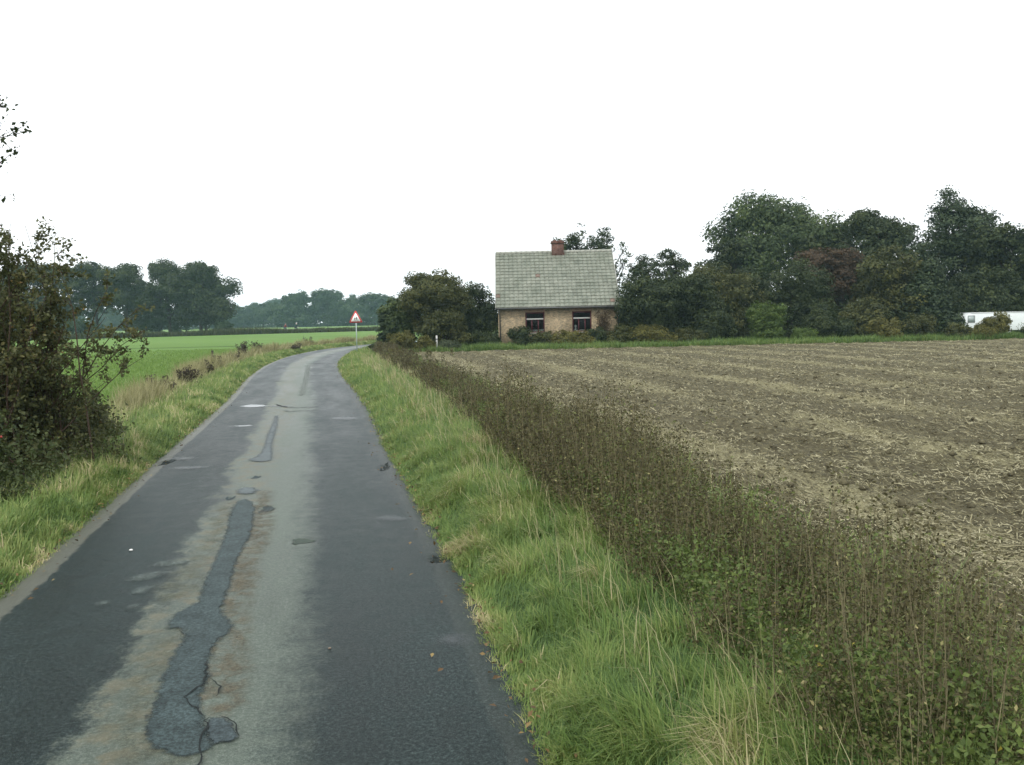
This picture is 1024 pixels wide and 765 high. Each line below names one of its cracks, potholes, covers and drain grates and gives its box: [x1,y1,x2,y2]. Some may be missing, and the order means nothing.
crack [184,661,240,765]
